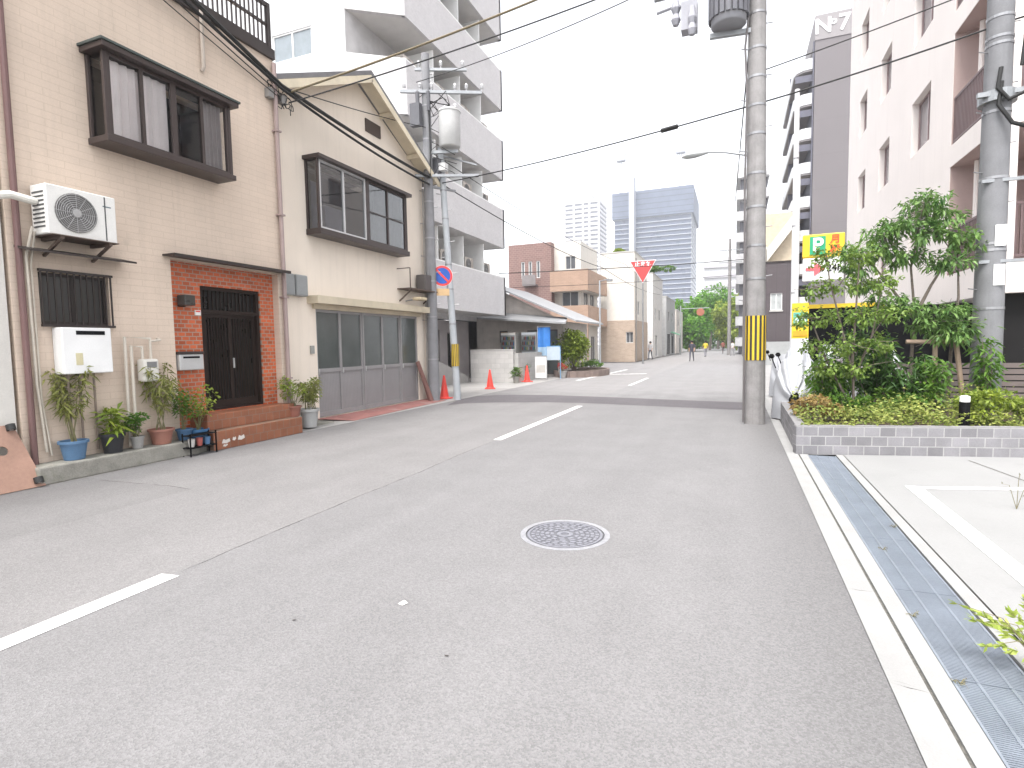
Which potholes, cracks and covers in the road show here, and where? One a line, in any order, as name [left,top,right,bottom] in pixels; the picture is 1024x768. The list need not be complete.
manhole cover [520,520,610,551]
drain grate [808,455,1024,768]
